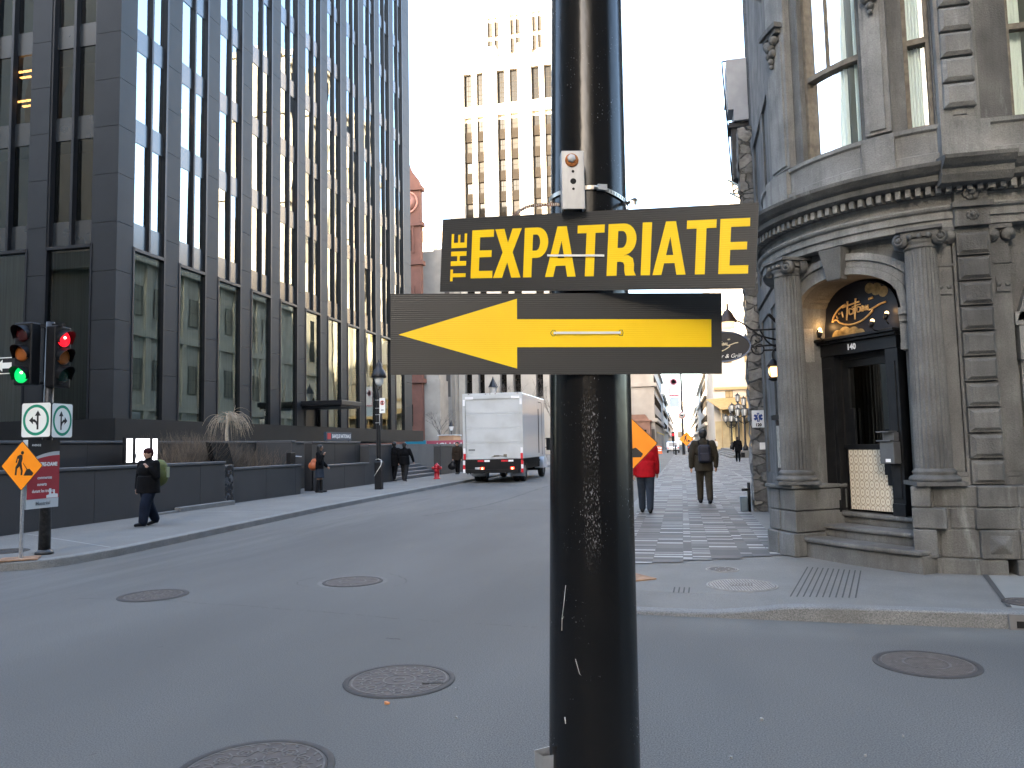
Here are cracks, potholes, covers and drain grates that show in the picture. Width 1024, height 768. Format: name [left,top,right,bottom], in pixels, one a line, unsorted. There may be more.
manhole cover [317,576,388,588]
manhole cover [116,589,190,602]
manhole cover [1001,597,1024,606]
manhole cover [343,664,455,699]
manhole cover [872,650,984,679]
manhole cover [180,739,335,768]
